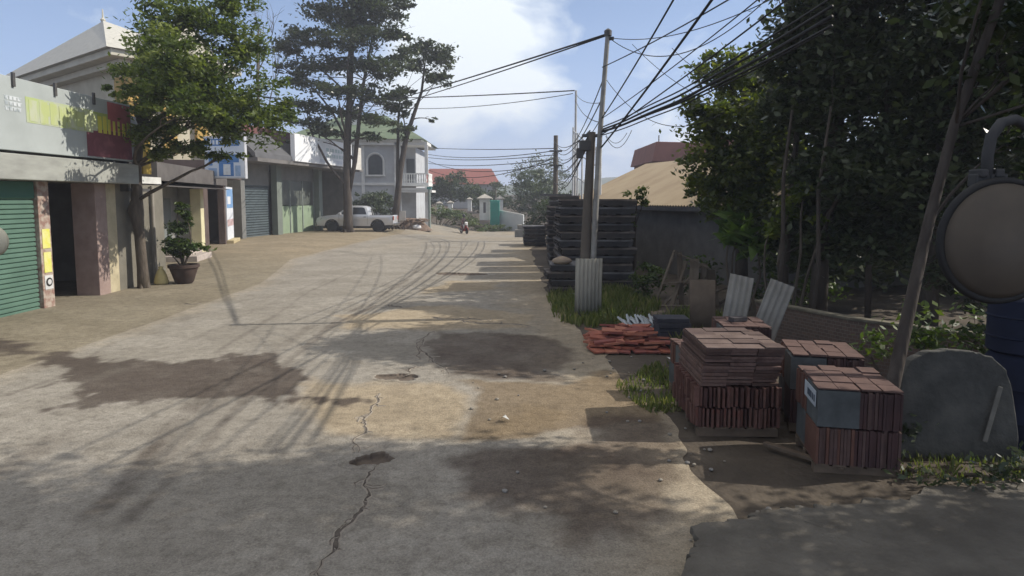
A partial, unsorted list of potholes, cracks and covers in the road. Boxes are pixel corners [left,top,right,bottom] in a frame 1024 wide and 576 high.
pothole [367,371,426,383]
crack [308,393,386,576]
pothole [338,448,406,470]
